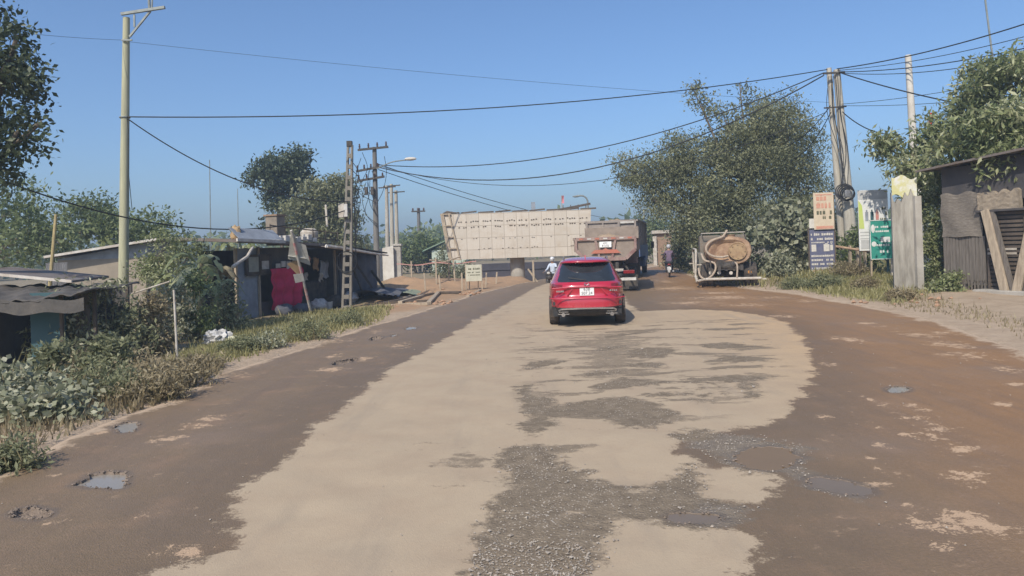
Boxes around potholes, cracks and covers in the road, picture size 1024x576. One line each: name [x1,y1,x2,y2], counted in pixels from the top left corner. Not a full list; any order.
pothole [663,511,725,524]
pothole [8,505,54,519]
pothole [886,385,912,393]
pothole [805,476,874,496]
pothole [113,420,142,433]
pothole [731,446,804,471]
pothole [70,470,132,489]
